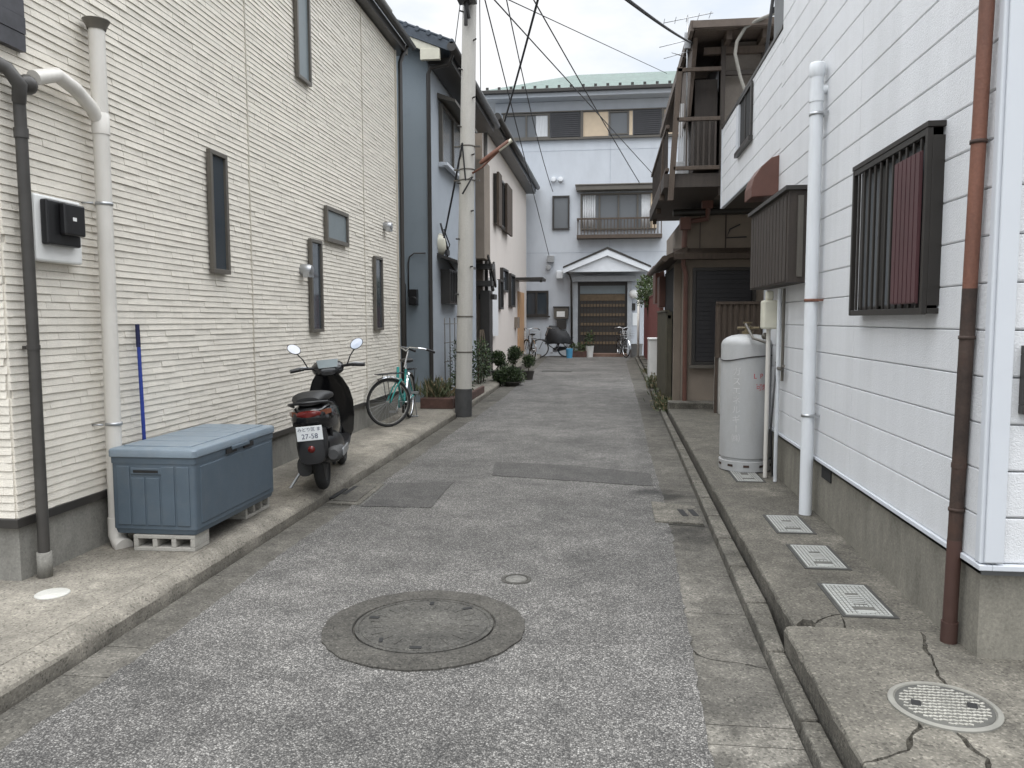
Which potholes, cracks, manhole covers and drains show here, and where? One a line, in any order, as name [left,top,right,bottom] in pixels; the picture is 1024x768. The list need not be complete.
utility cover [501,574,531,585]
manhole cover [887,681,1005,734]
manhole cover [322,590,525,672]
